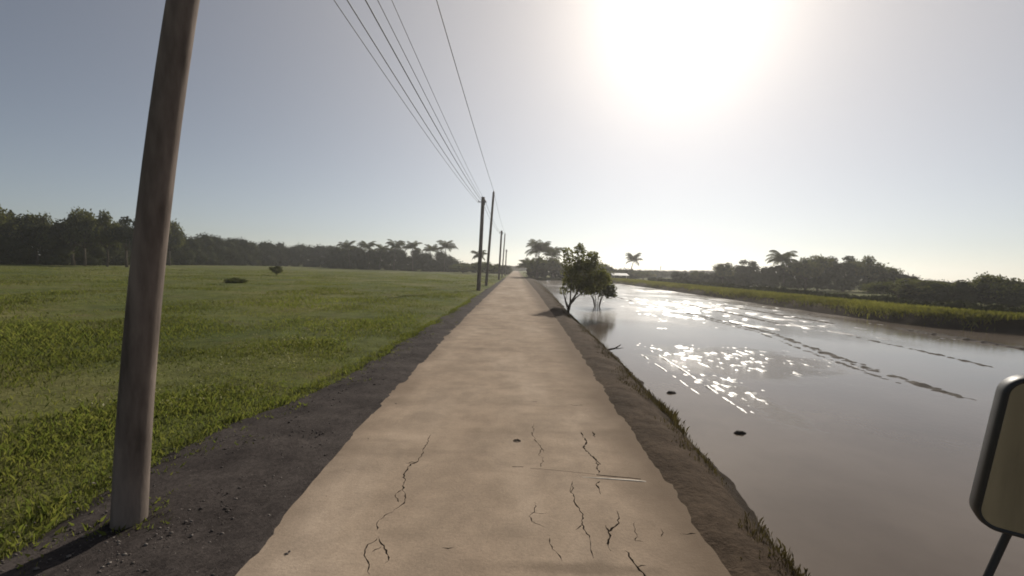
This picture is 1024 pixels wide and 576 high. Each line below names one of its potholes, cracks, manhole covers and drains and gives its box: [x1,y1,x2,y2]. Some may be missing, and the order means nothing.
crack [529,505,562,560]
crack [570,432,663,576]
crack [363,436,430,572]
